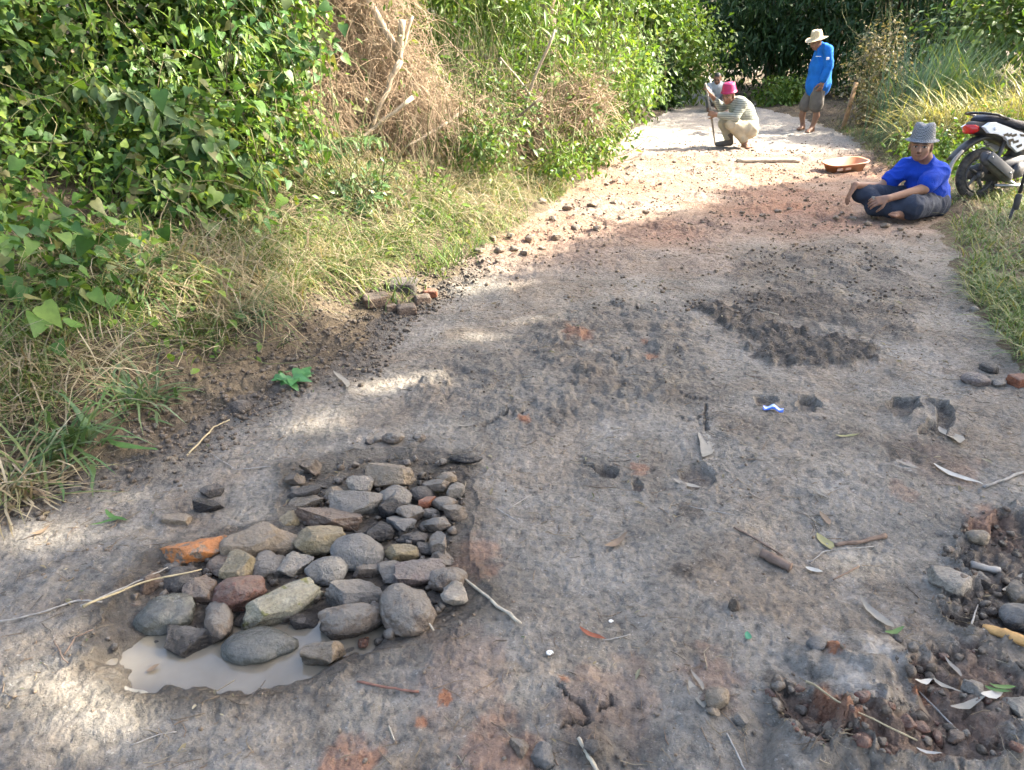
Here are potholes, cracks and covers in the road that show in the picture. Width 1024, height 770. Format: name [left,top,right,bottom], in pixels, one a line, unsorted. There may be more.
pothole [77,446,492,705]
pothole [936,506,1024,647]
pothole [843,634,1024,770]
pothole [768,679,876,754]
crack [555,682,615,729]
